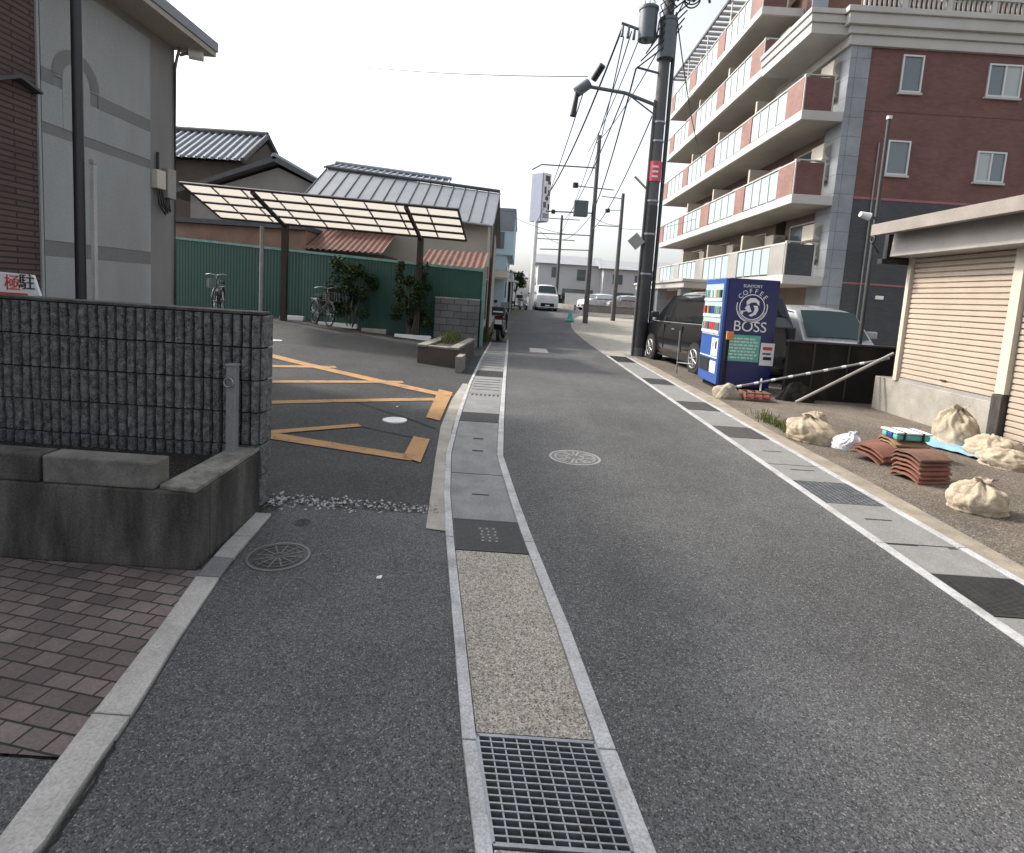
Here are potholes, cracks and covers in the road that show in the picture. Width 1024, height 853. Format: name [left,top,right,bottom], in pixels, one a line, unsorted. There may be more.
manhole cover [245,542,311,572]
drain grate [452,518,529,555]
drain grate [930,573,1024,619]
manhole cover [549,450,601,466]
drain grate [793,480,885,507]
drain grate [476,733,635,853]
